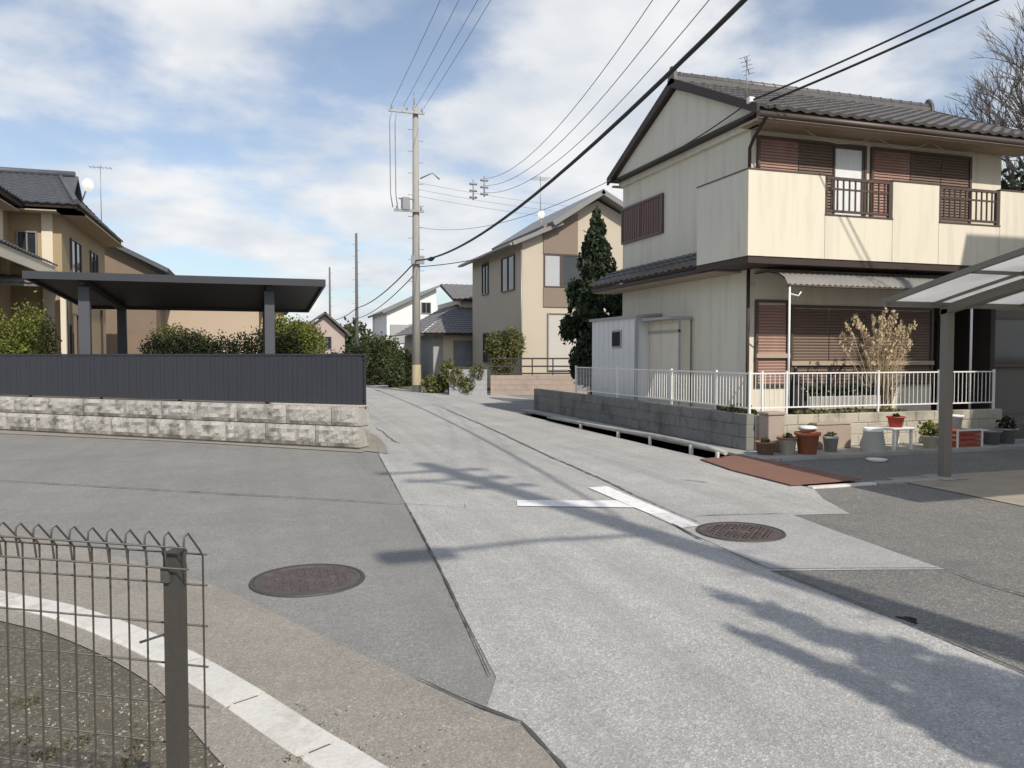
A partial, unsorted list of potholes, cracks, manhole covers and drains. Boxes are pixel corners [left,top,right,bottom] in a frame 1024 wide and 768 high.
manhole cover [696,522,786,542]
manhole cover [248,563,365,597]
